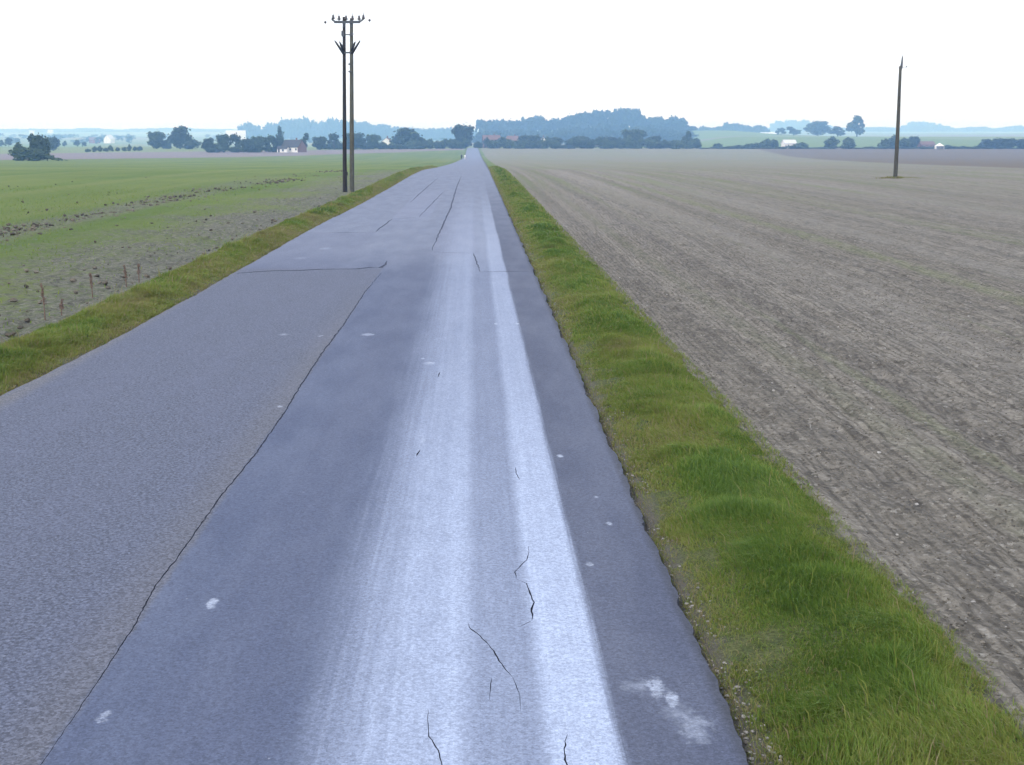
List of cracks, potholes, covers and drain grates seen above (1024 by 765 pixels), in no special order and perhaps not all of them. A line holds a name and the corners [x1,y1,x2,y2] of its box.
crack [427,712,442,765]
crack [468,623,521,712]
crack [340,177,518,272]
crack [514,546,535,619]
